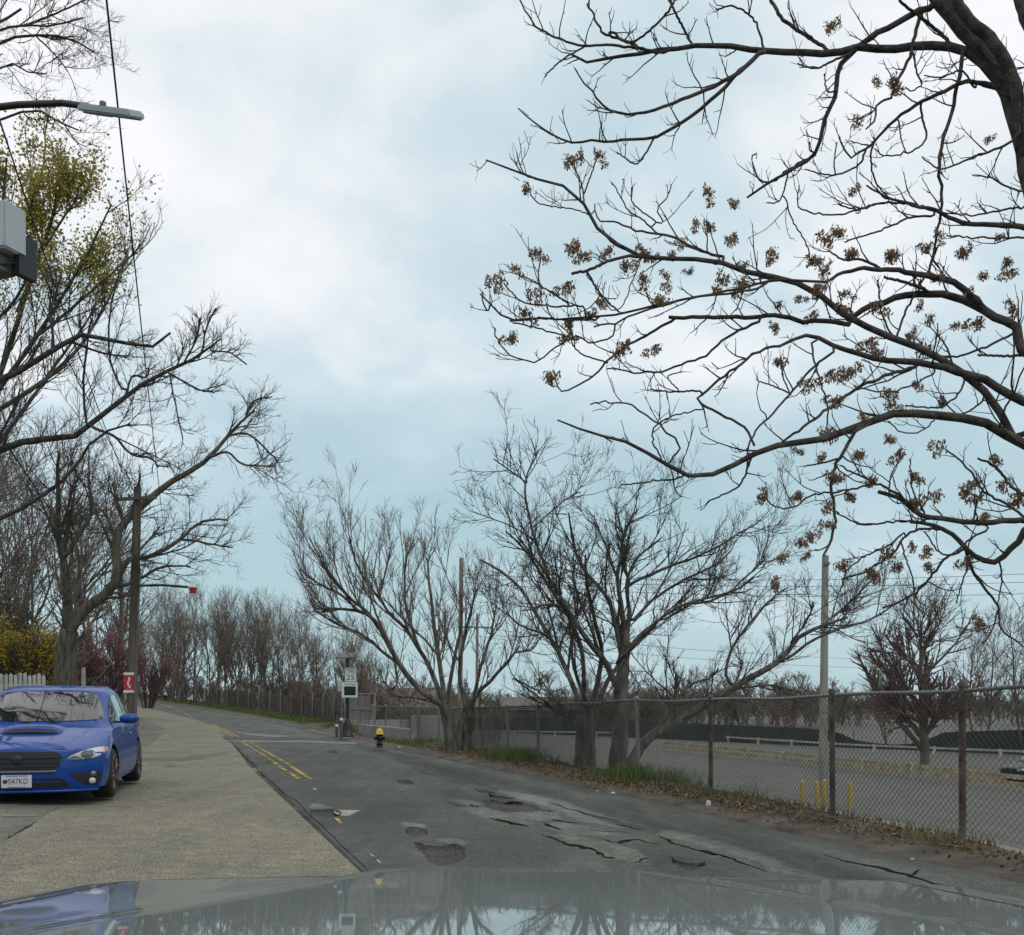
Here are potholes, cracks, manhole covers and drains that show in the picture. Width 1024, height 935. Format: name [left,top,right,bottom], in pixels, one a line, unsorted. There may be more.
pothole [481,800,542,813]
pothole [405,826,429,837]
pothole [671,856,706,871]
crack [448,801,767,872]
pothole [412,842,466,866]
crack [825,855,947,886]
